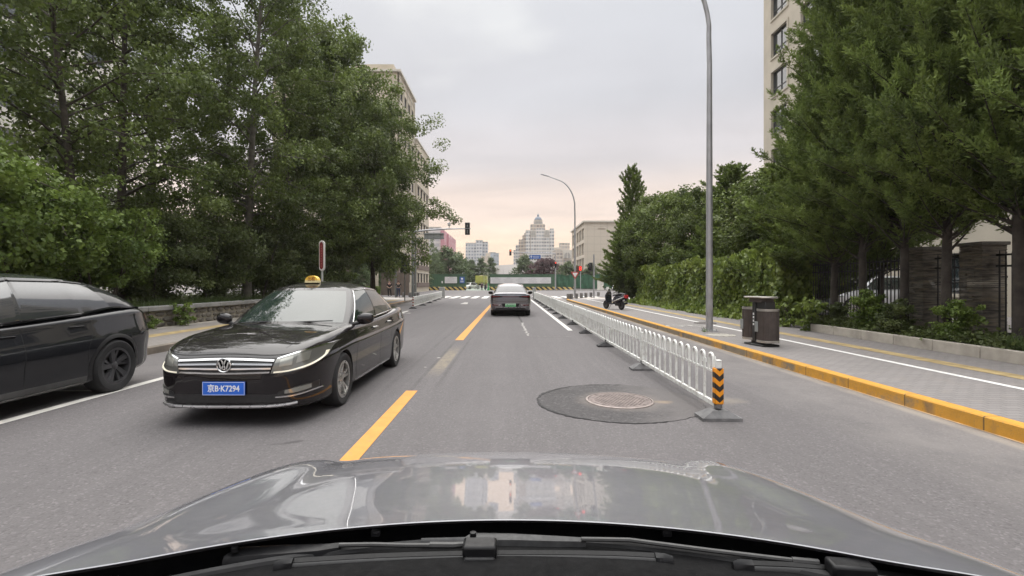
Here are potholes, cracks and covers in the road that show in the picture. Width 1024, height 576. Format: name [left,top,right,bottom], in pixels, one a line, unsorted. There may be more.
manhole cover [586,392,654,409]
